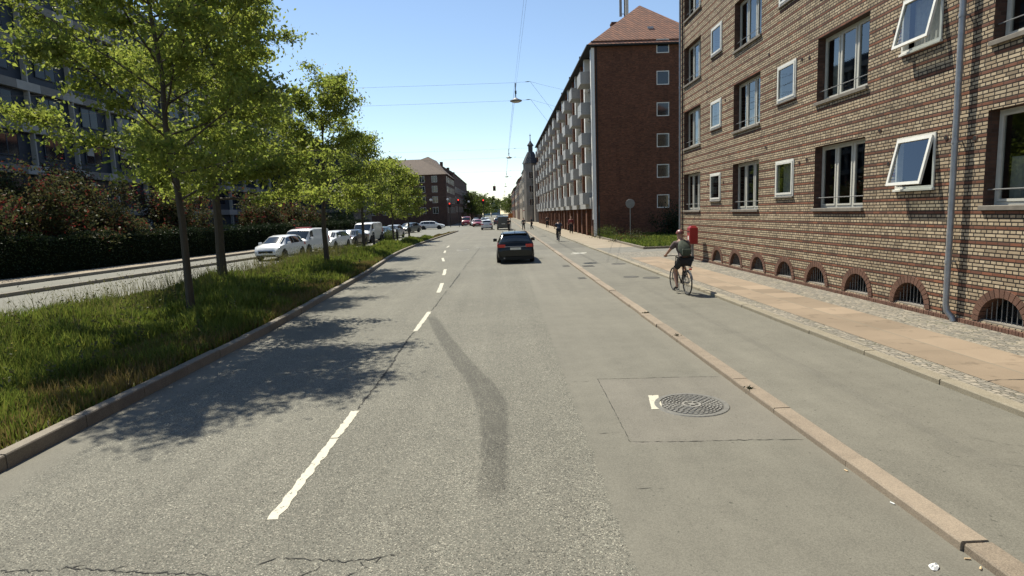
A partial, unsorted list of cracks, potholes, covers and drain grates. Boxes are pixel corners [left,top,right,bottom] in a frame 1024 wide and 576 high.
manhole cover [654,393,730,417]
crack [257,553,399,576]
crack [358,332,415,409]
crack [0,565,208,576]
